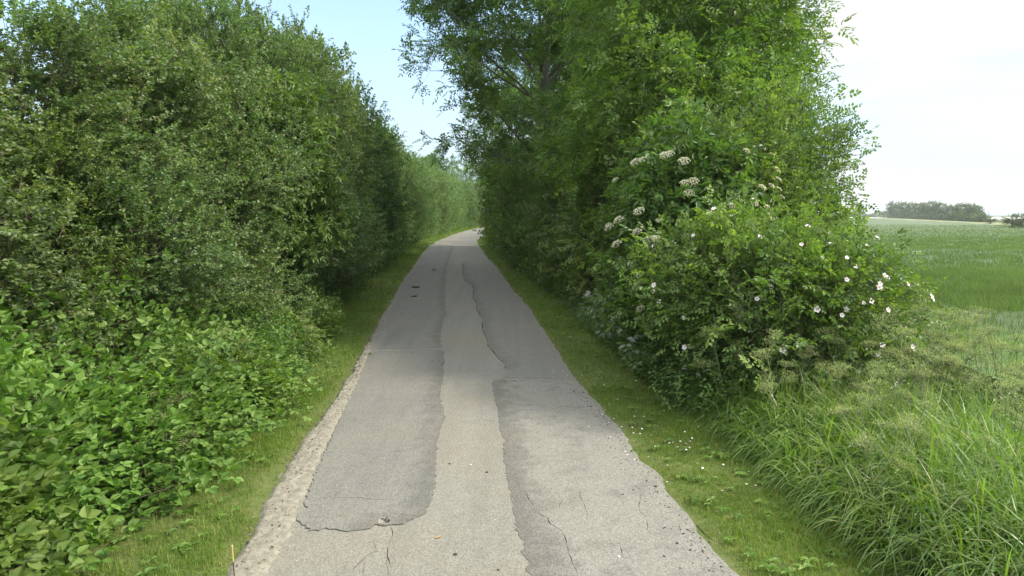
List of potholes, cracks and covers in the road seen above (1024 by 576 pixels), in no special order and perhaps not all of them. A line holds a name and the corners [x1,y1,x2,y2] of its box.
crack [526,494,577,572]
crack [353,527,393,576]
